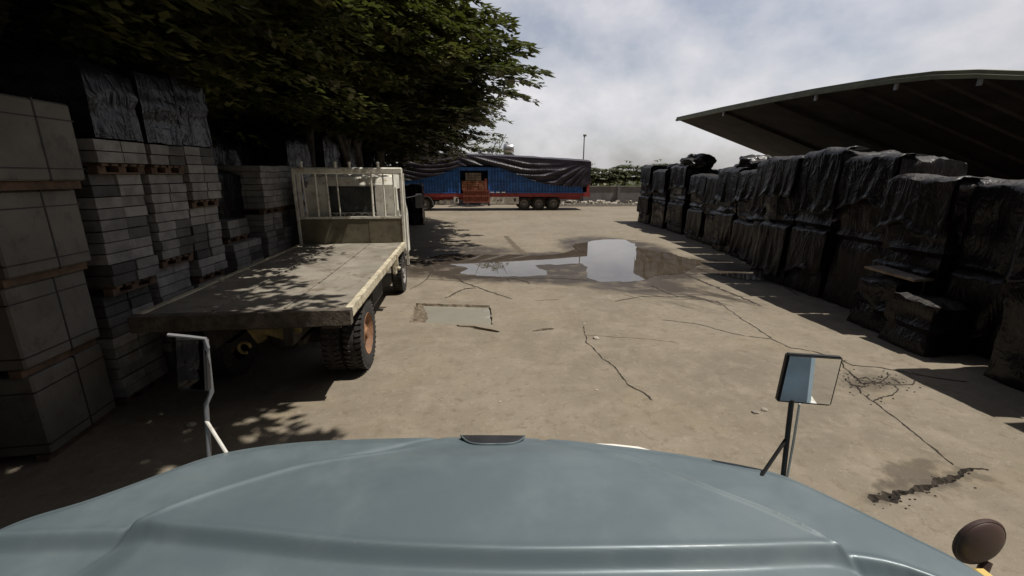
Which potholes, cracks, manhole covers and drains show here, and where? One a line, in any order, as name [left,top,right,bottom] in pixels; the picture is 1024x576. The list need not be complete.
crack [411,270,584,301]
crack [618,273,967,465]
crack [583,326,672,400]
